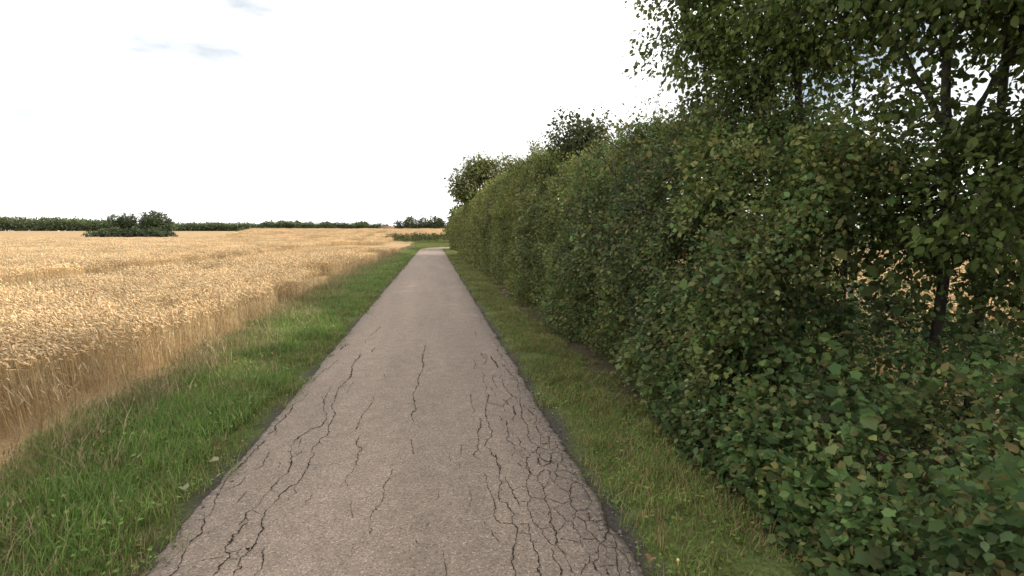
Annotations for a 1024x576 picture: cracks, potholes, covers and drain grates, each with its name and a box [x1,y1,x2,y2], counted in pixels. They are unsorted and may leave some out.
crack [145,327,380,576]
crack [470,333,631,576]
